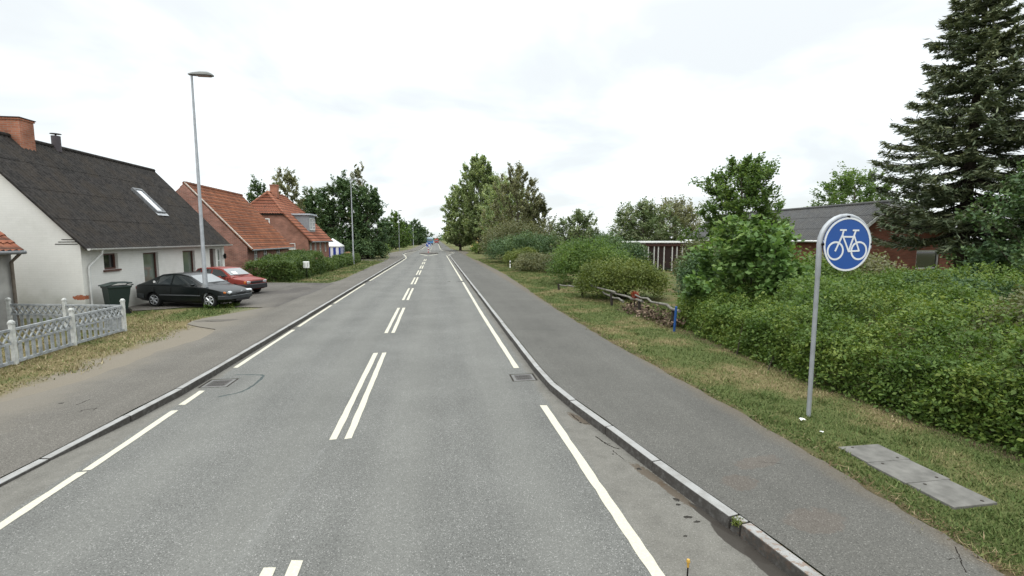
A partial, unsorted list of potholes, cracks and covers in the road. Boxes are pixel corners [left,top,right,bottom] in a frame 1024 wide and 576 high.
drain grate [510,374,537,382]
drain grate [199,379,238,388]
